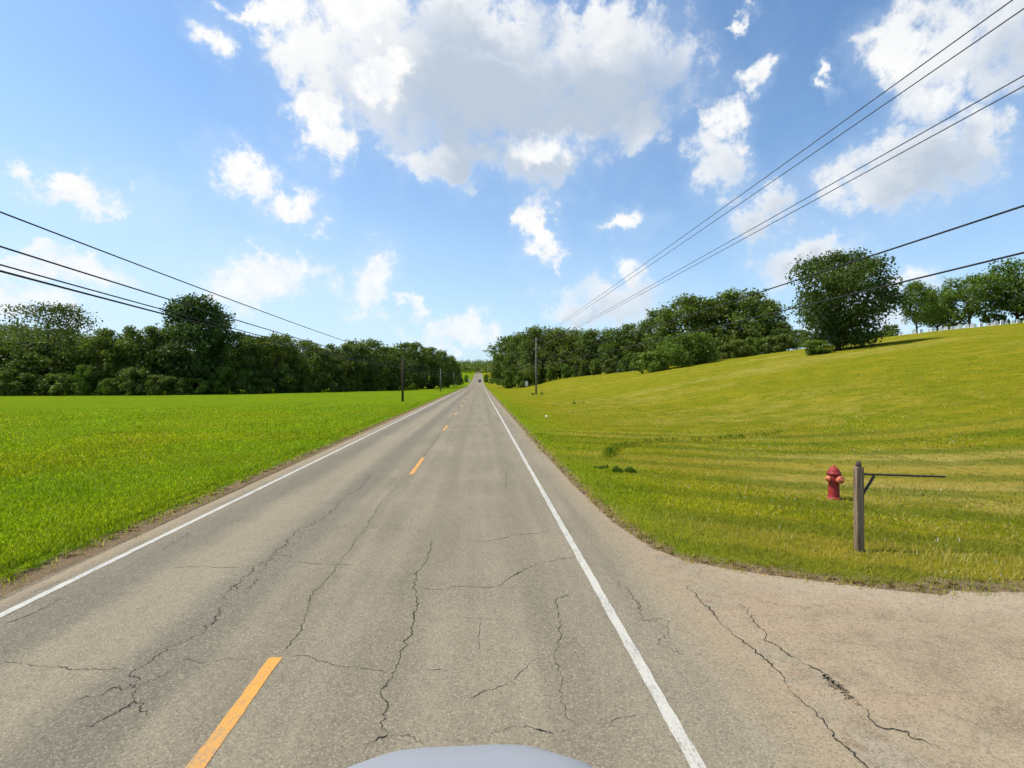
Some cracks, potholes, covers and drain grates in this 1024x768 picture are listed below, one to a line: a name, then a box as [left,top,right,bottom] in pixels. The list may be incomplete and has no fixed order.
crack [468,594,575,737]
crack [618,581,681,655]
crack [687,586,930,768]
crack [16,478,432,748]
pothole [822,674,854,699]
